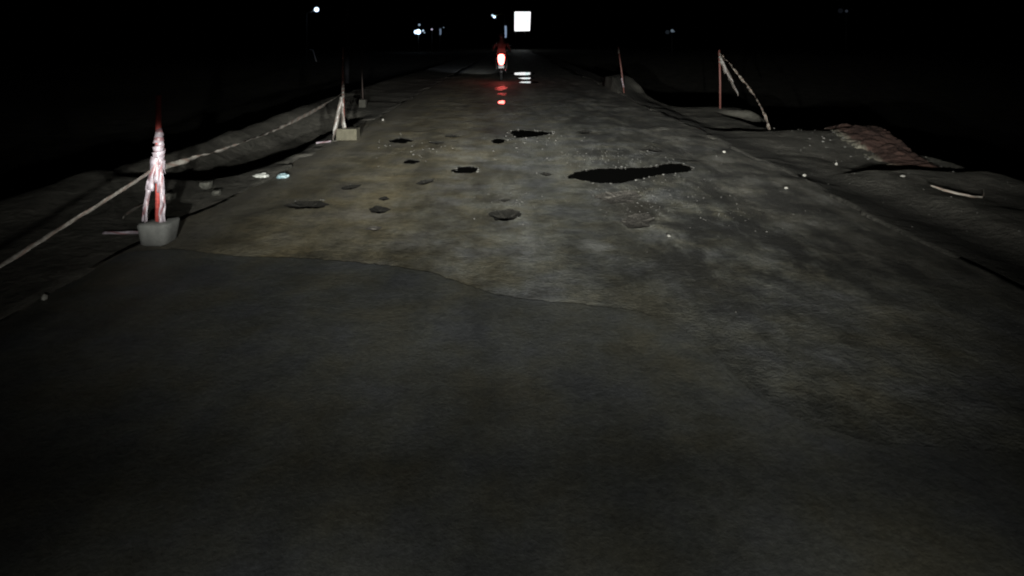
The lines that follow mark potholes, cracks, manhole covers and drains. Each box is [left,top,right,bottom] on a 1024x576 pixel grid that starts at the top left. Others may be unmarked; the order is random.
pothole [284,201,329,209]
pothole [567,163,694,183]
pothole [510,129,553,138]
pothole [619,213,655,228]
pothole [489,209,522,221]
pothole [369,205,391,214]
